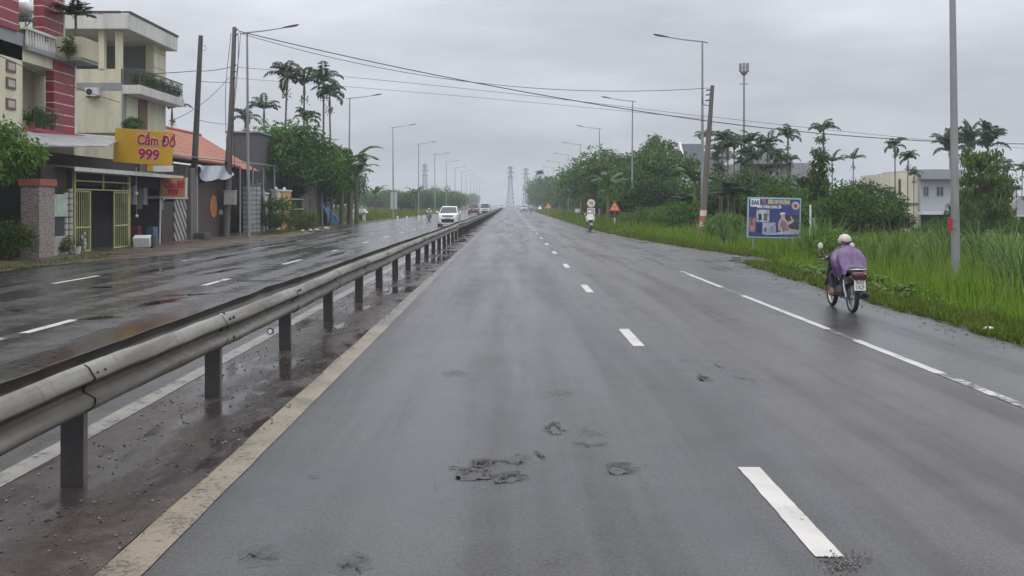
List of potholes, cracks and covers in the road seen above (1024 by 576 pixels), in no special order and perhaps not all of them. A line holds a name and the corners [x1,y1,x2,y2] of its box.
pothole [456,468,491,481]
pothole [546,422,563,434]
pothole [607,462,631,475]
pothole [495,472,526,483]
pothole [474,460,492,468]
